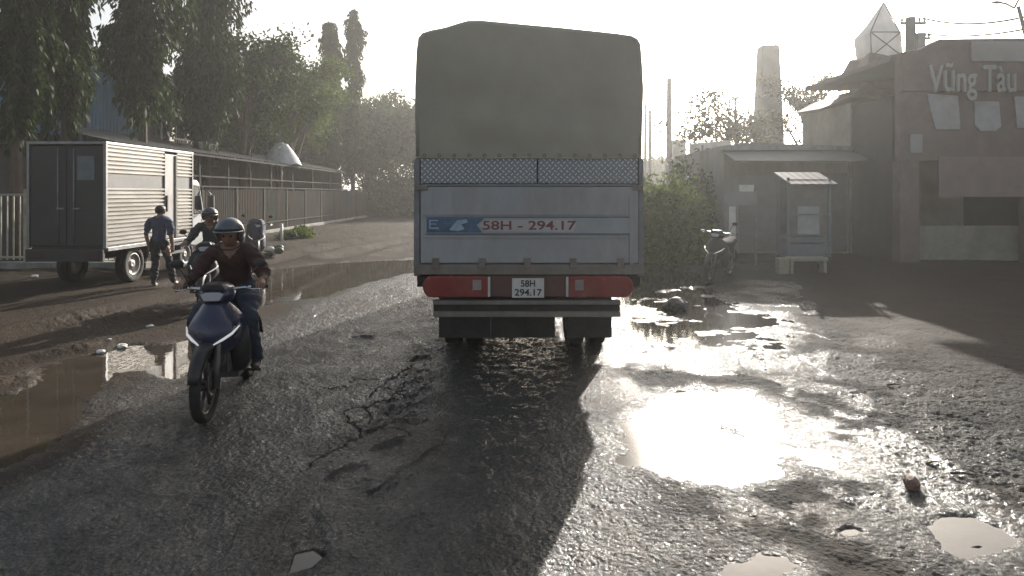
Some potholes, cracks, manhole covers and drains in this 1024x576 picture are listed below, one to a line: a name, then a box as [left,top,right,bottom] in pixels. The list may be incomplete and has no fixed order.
pothole [721,552,799,576]
pothole [837,526,862,536]
pothole [927,516,1016,560]
pothole [283,510,326,576]
pothole [339,335,373,343]
pothole [353,438,404,465]
pothole [609,389,849,488]
crack [299,364,428,472]
